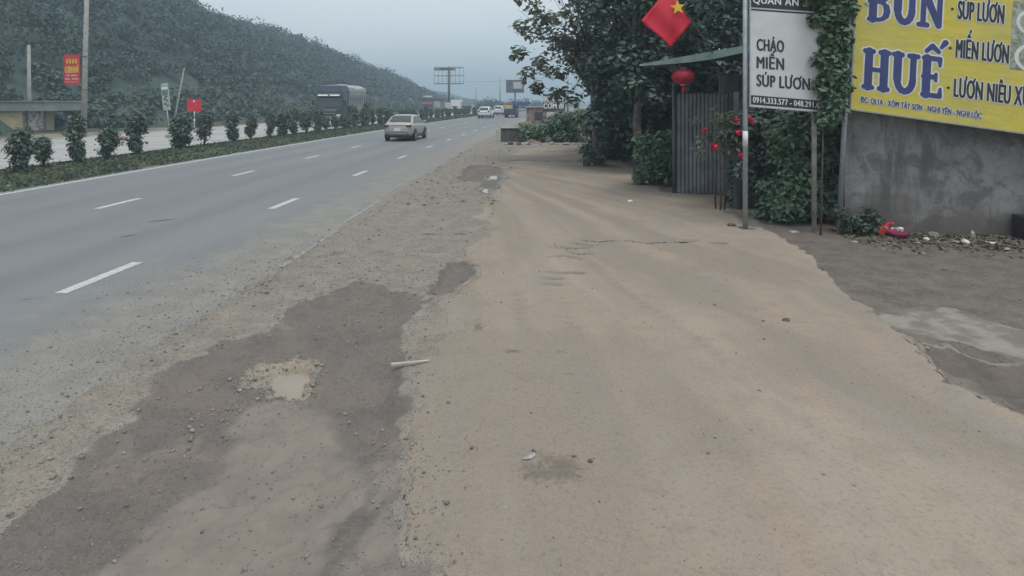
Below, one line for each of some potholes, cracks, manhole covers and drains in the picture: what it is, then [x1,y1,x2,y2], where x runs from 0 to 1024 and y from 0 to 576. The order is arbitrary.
crack [542,239,729,285]
